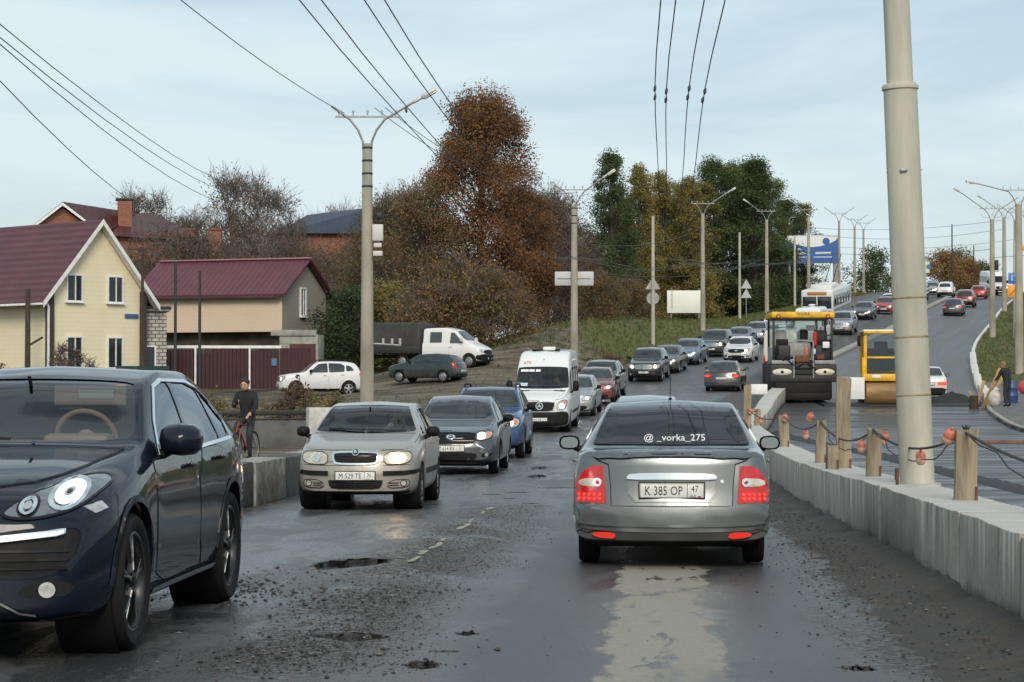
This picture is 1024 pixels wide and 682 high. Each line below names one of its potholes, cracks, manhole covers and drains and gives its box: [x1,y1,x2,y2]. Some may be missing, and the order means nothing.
pothole [305,557,397,570]
pothole [401,659,442,670]
pothole [311,632,390,642]
